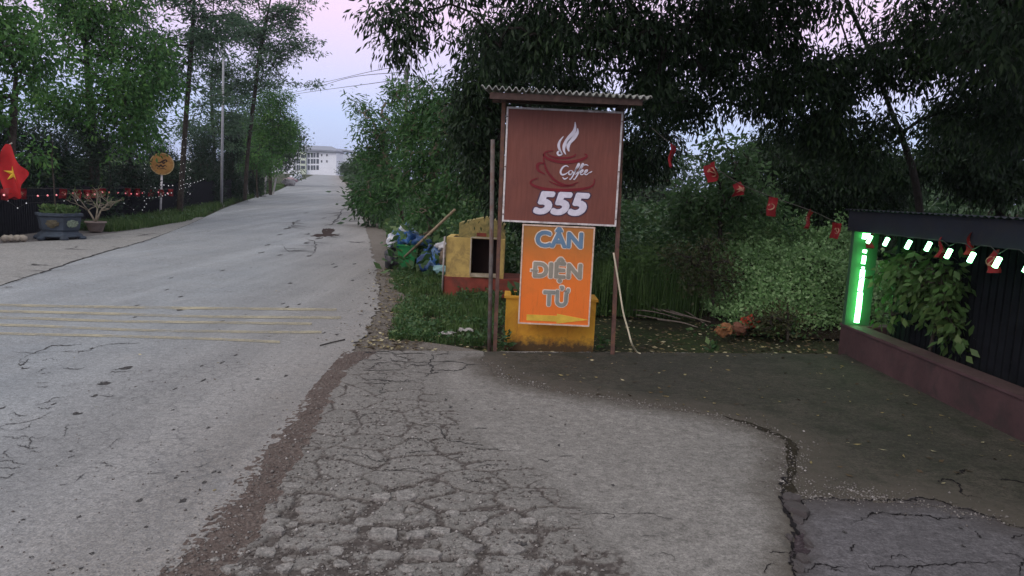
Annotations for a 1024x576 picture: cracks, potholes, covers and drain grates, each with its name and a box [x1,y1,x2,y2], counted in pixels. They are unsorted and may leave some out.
crack [722,415,1024,576]
crack [343,425,515,484]
crack [355,349,477,393]
pothole [313,228,338,237]
crack [278,208,361,255]
crack [0,343,140,478]
